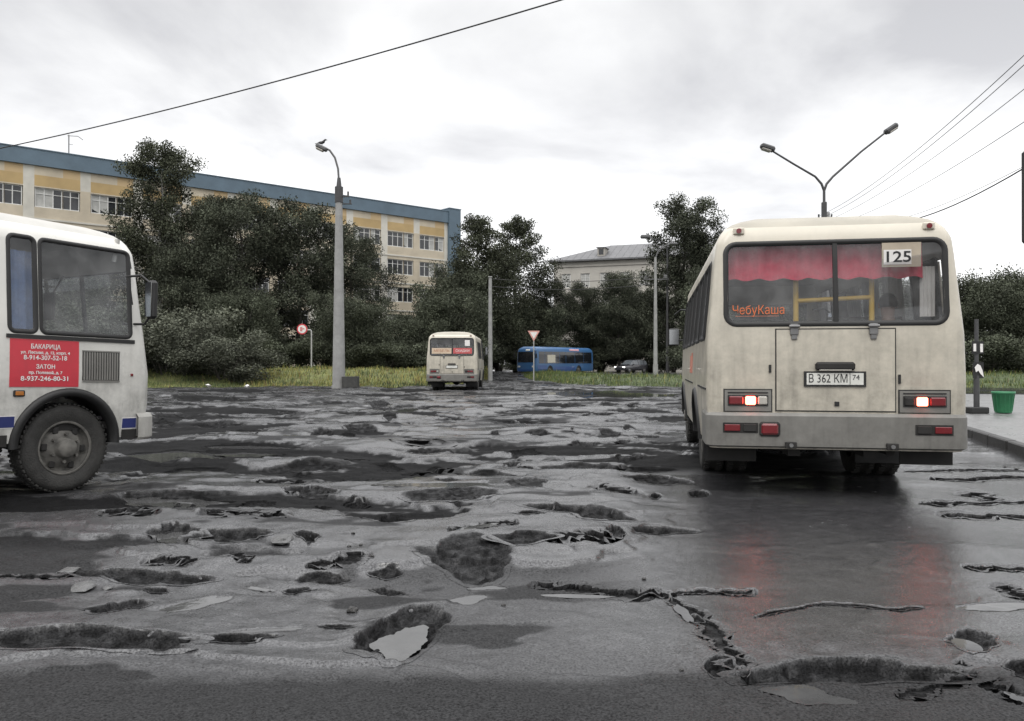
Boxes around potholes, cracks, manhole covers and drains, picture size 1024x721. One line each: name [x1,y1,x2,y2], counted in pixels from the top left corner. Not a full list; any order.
pothole [343,600,457,668]
pothole [0,622,215,655]
pothole [716,653,1000,689]
crack [905,468,1024,521]
pothole [515,501,645,522]
crack [529,580,923,670]
pothole [604,524,626,542]
pothole [290,570,355,585]
crack [963,564,1024,601]
pothole [701,653,741,679]
pothole [1001,658,1024,678]
pothole [396,486,504,502]
